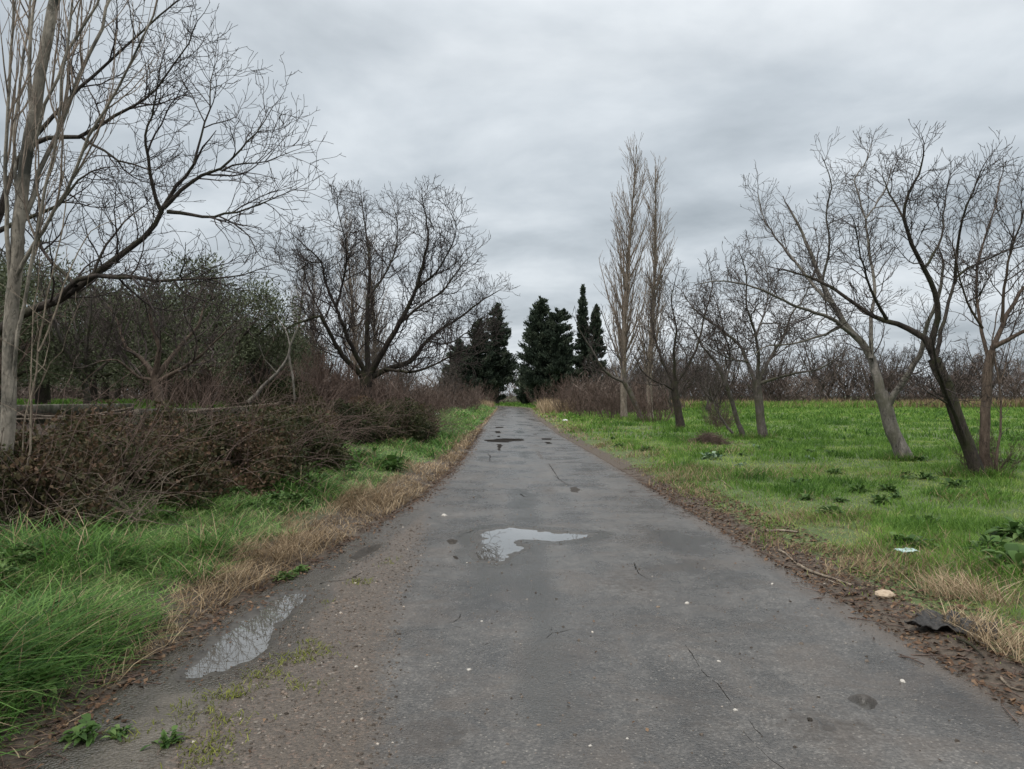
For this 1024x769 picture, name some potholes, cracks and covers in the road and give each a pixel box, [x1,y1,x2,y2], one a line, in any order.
pothole [468,526,598,566]
crack [685,645,784,769]
pothole [848,694,878,710]
